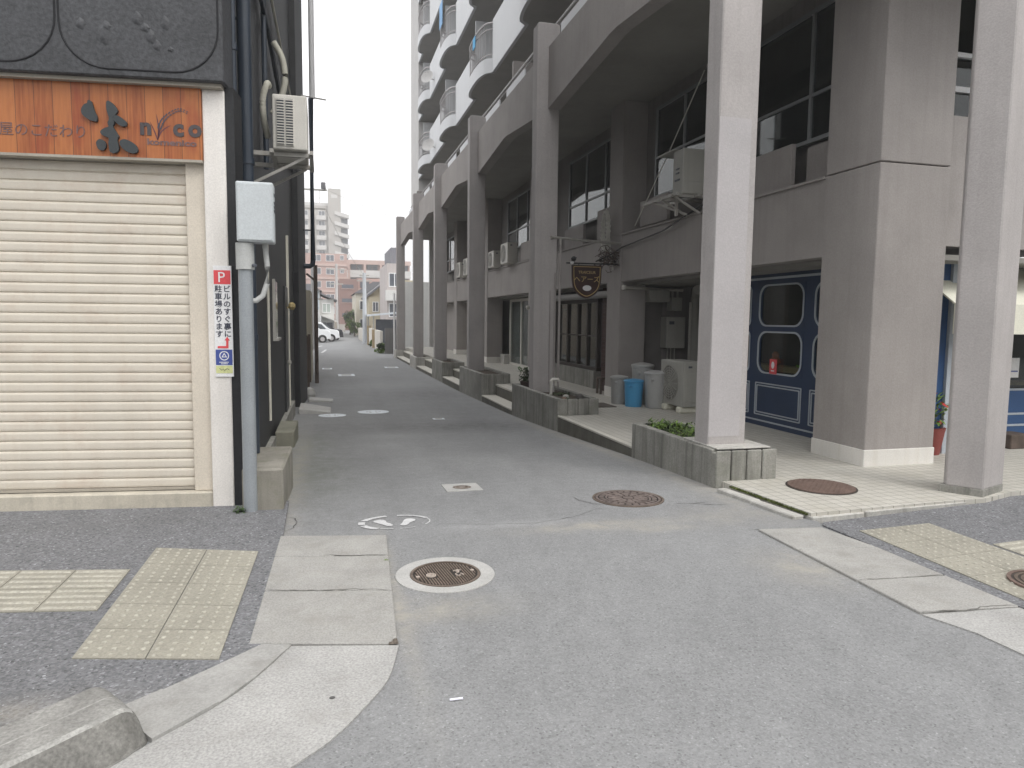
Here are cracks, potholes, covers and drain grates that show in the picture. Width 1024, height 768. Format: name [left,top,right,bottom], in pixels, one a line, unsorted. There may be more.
manhole cover [395,557,495,594]
manhole cover [1006,570,1024,588]
manhole cover [441,483,483,492]
manhole cover [592,490,664,507]
manhole cover [785,479,858,495]
